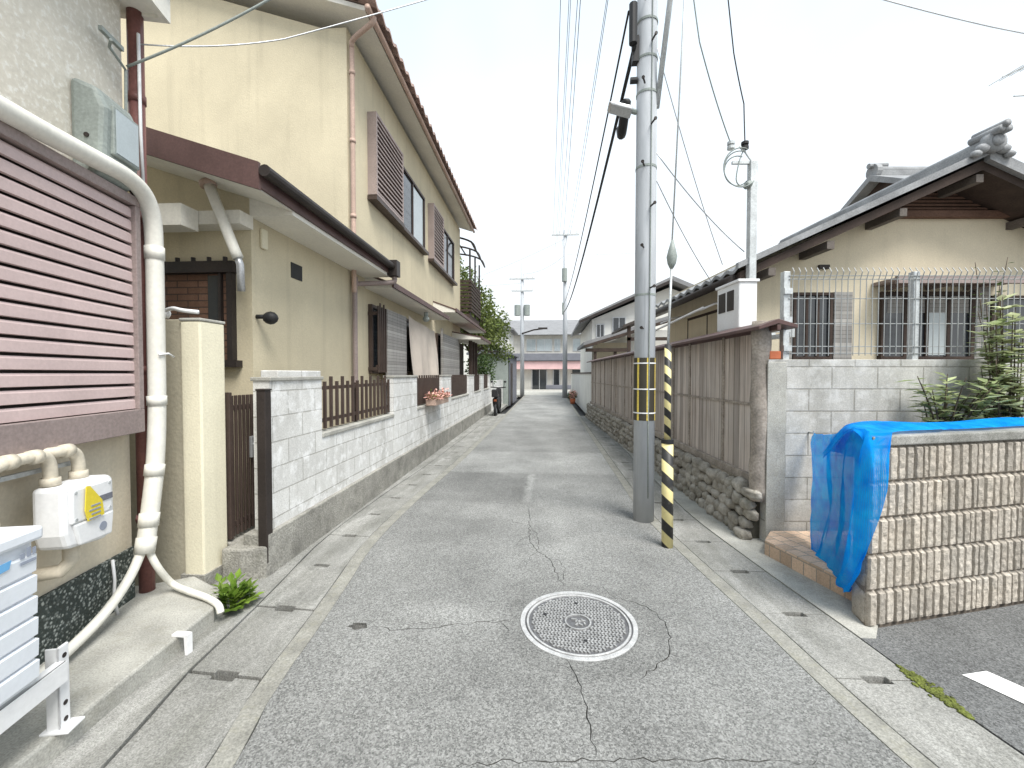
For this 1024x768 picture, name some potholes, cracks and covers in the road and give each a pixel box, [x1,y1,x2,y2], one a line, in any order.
manhole cover [520,591,638,662]
crack [558,660,596,748]
crack [376,616,516,633]
crack [511,504,566,582]
crack [603,587,688,681]
